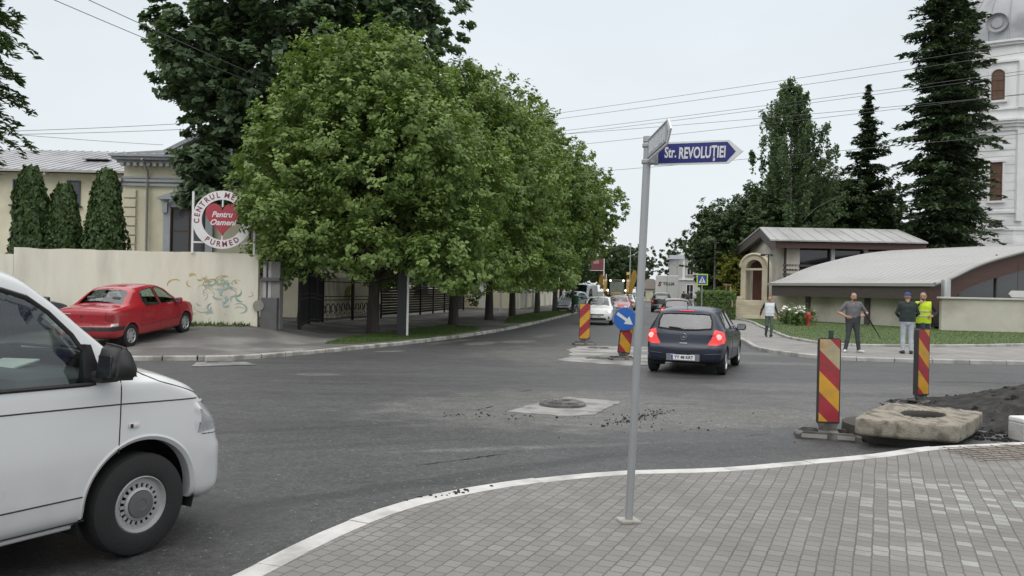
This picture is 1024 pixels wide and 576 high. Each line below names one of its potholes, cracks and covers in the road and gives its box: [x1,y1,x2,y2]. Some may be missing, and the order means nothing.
manhole cover [539,398,586,408]
